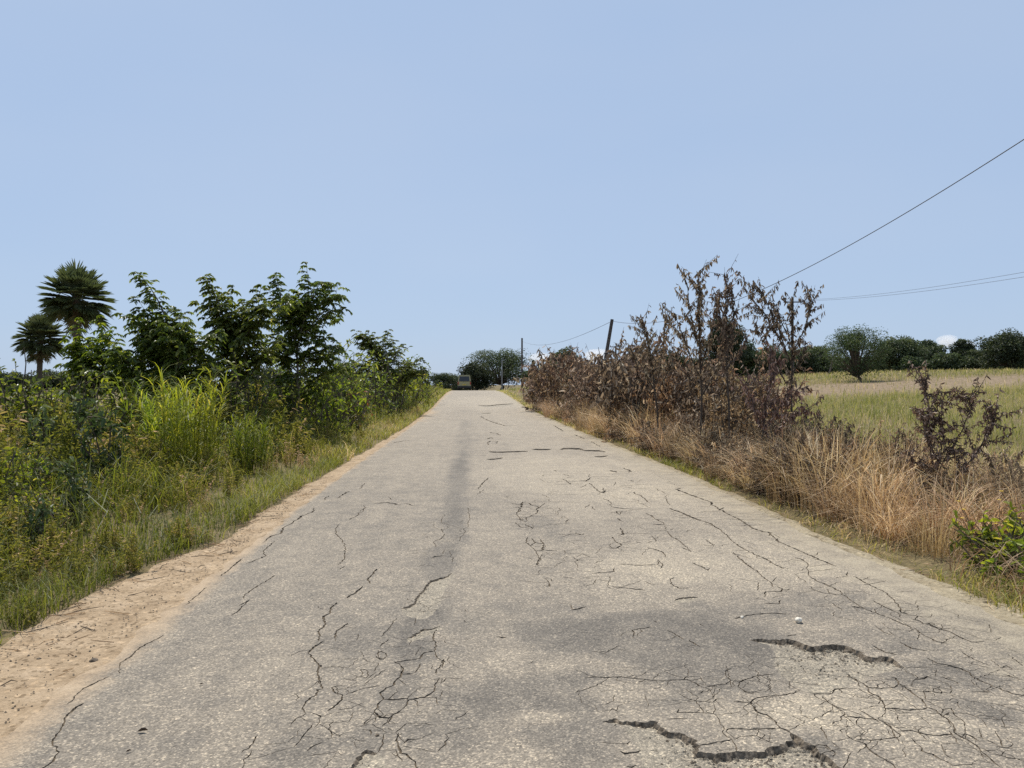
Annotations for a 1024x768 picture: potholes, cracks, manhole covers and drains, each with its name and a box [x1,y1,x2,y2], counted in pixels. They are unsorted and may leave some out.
crack [507,468,1024,768]
crack [251,520,475,768]
